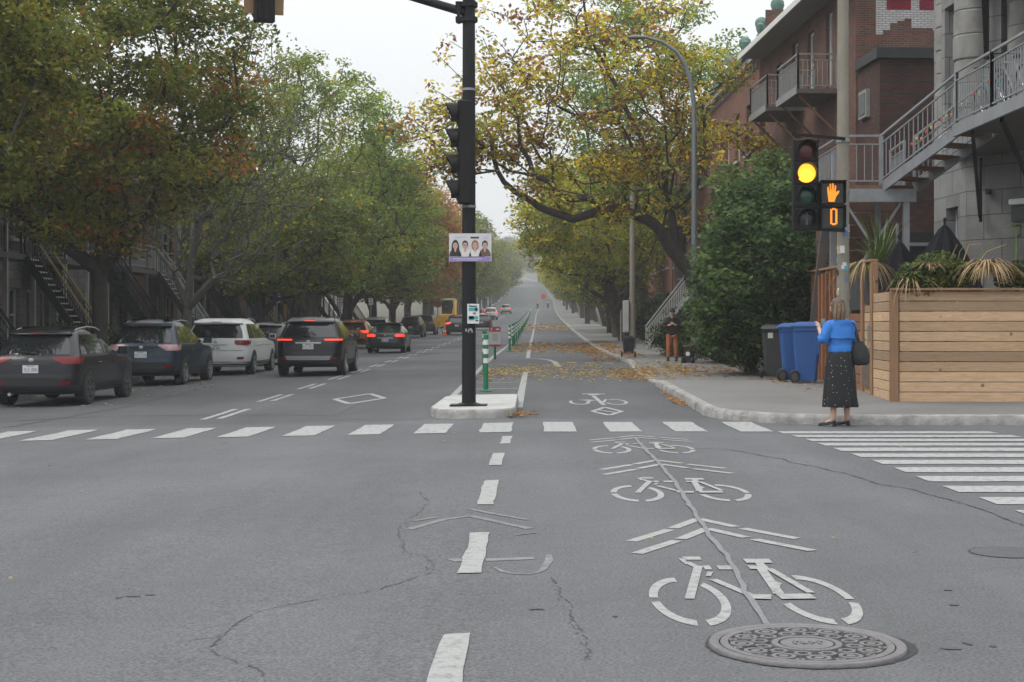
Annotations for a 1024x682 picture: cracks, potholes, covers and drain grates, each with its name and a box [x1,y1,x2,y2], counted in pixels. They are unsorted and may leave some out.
crack [551,576,592,660]
crack [695,448,1024,526]
manhole cover [968,547,1024,558]
manhole cover [705,623,918,669]
crack [184,491,434,676]
